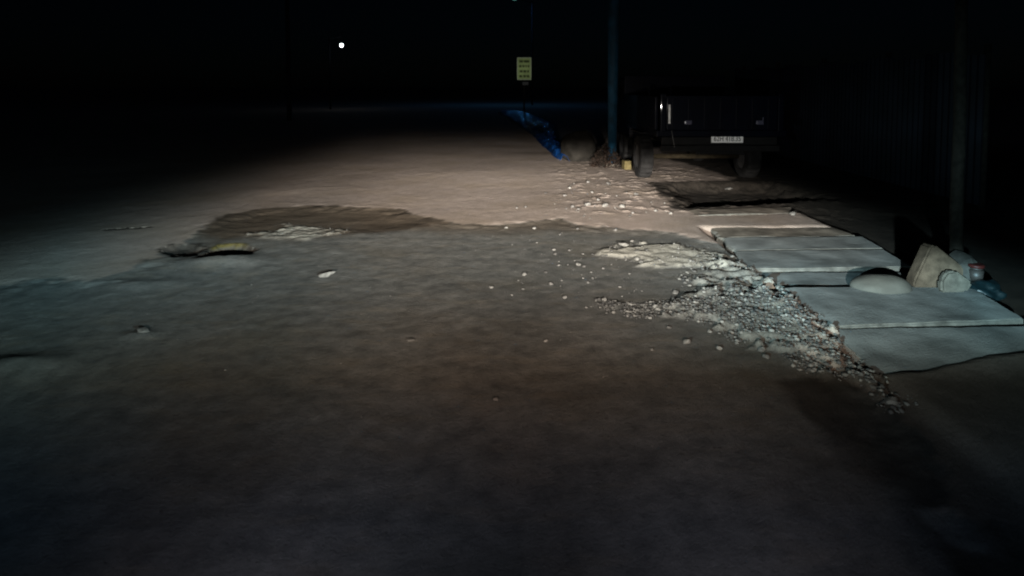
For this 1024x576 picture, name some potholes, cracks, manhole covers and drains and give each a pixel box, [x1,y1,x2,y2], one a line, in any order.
pothole [159,243,209,257]
pothole [195,243,259,258]
